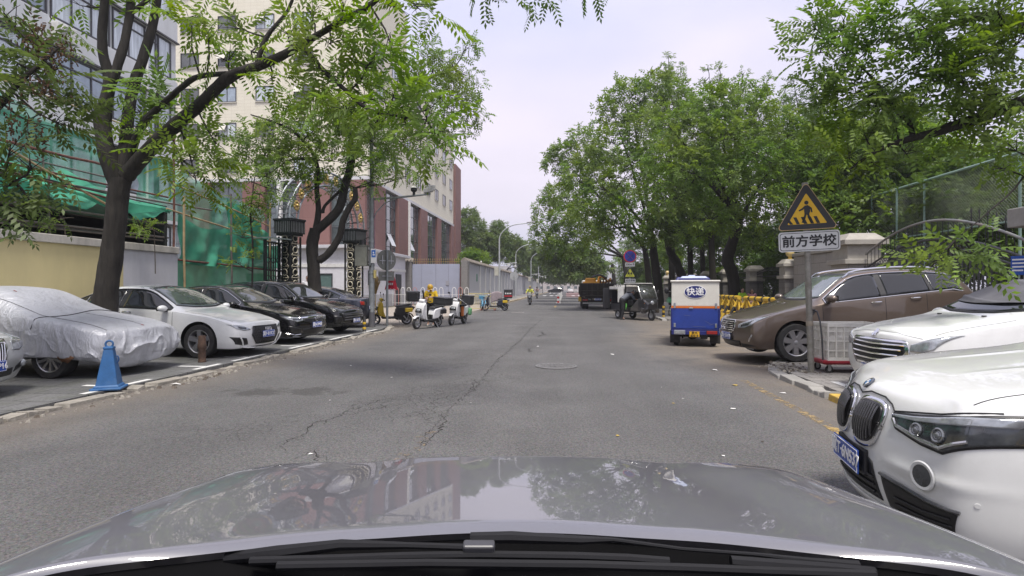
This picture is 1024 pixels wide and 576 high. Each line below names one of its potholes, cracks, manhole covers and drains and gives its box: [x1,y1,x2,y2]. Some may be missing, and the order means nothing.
crack [153,326,543,460]
